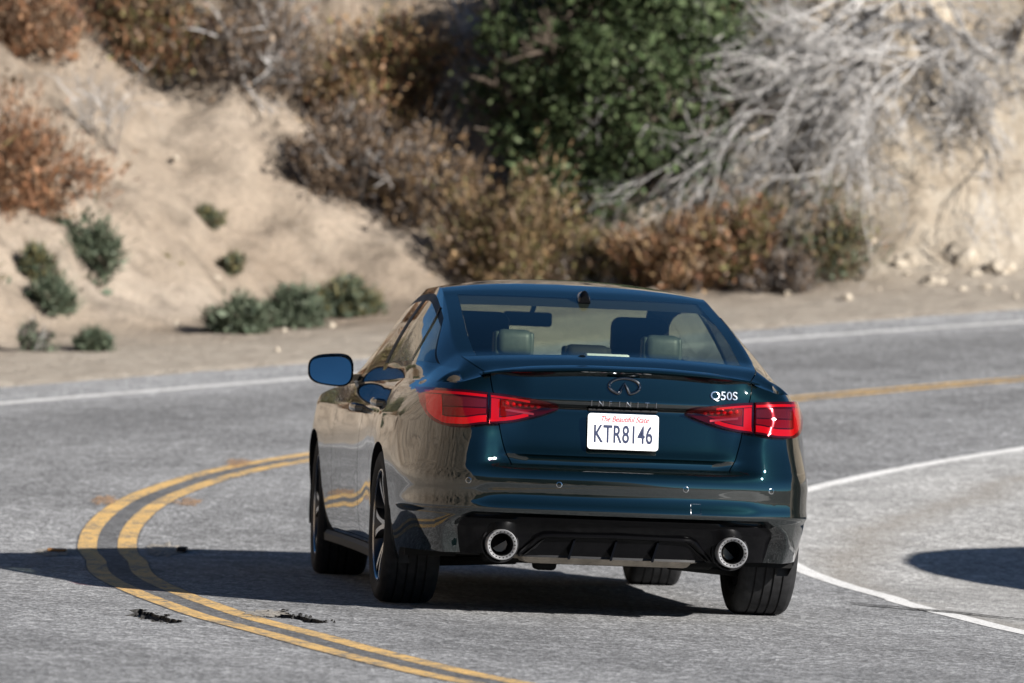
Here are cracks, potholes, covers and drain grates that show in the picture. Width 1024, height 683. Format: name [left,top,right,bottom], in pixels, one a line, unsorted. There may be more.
pothole [263,609,336,623]
pothole [124,609,184,624]
